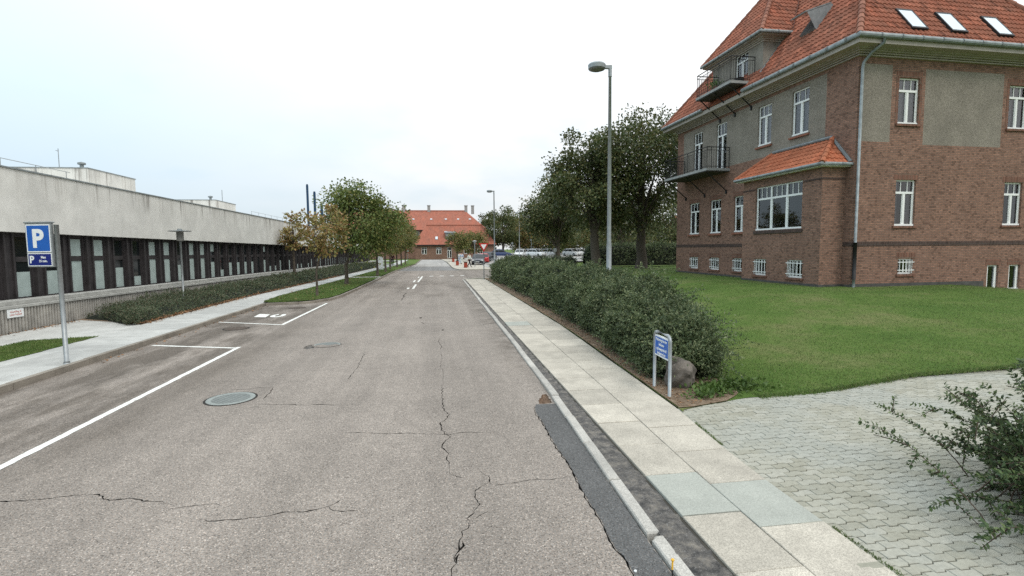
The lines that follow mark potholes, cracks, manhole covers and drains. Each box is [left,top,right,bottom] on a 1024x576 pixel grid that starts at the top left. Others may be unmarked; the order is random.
manhole cover [203,392,258,406]
crack [238,387,328,405]
crack [0,494,356,522]
crack [342,355,565,576]
